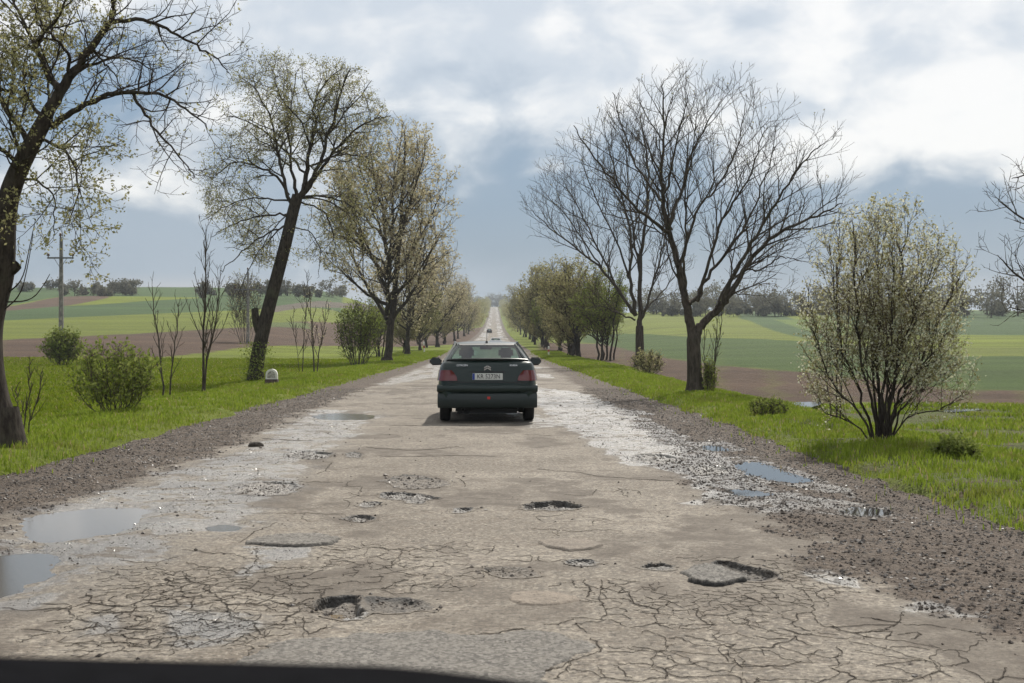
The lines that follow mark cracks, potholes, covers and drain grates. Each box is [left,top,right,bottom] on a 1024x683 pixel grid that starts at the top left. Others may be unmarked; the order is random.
pothole [308,594,373,621]
pothole [375,491,443,504]
crack [544,556,1024,683]
pothole [635,562,679,571]
pothole [482,566,545,579]
pothole [345,595,440,617]
pothole [338,514,379,523]
pothole [285,451,335,459]
pothole [562,558,608,566]
crack [4,512,593,657]
